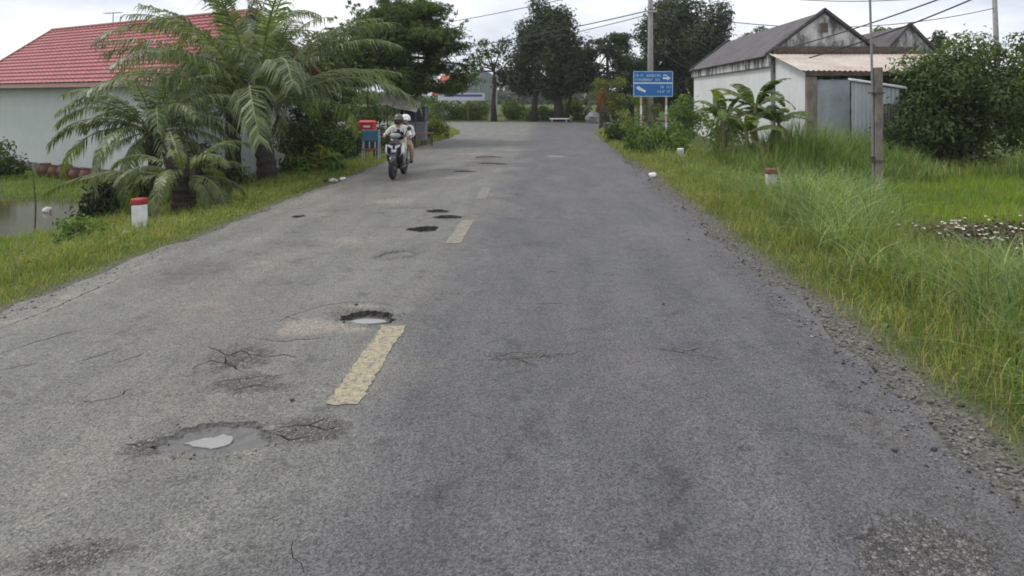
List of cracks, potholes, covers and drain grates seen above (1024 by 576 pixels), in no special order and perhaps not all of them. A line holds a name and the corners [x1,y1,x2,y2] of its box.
pothole [336,308,405,327]
crack [649,346,722,360]
pothole [406,225,443,234]
crack [481,348,585,366]
crack [276,418,338,441]
crack [193,336,326,391]
pothole [149,415,297,460]
